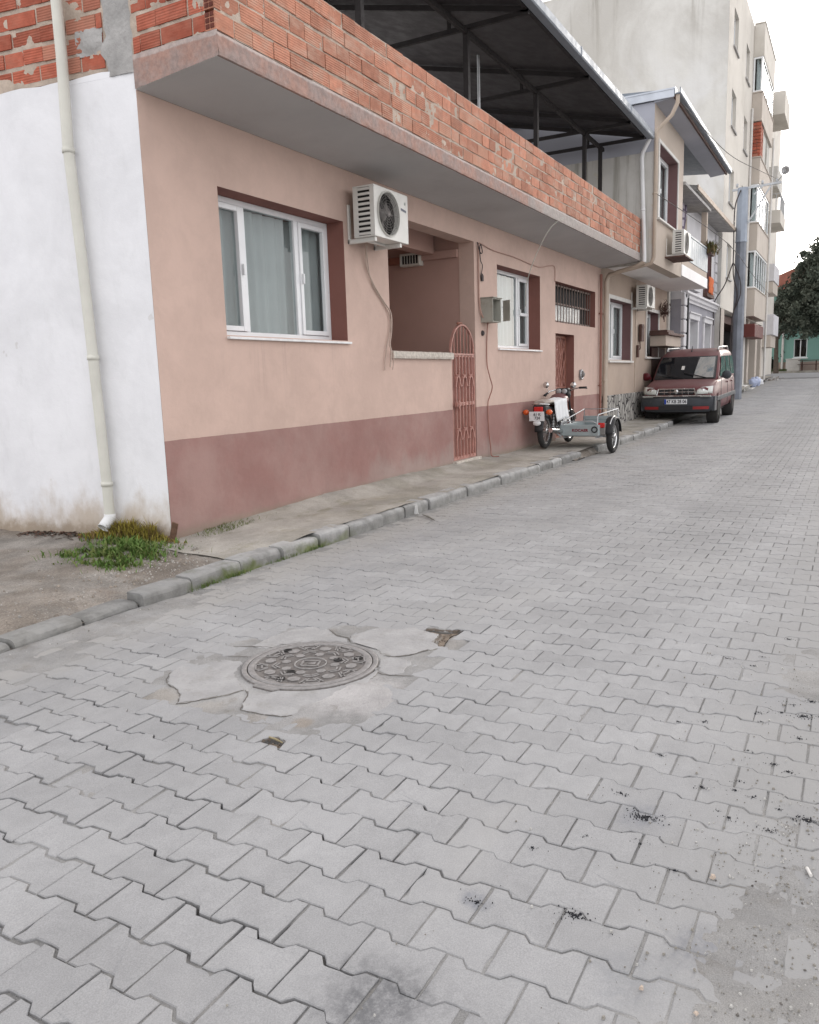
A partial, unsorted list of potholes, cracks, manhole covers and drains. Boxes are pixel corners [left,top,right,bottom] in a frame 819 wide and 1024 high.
pothole [426,628,463,647]
manhole cover [241,641,379,692]
